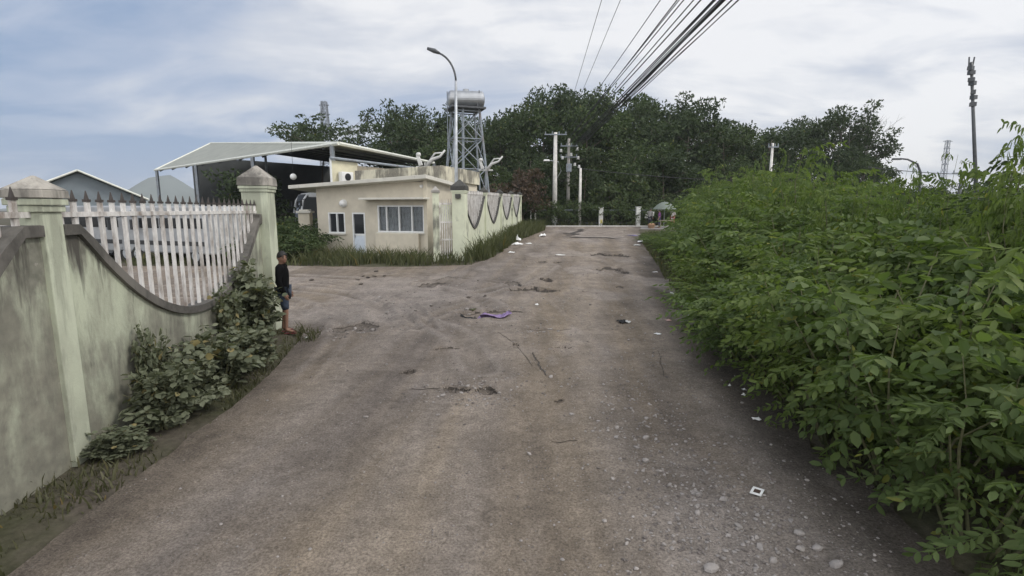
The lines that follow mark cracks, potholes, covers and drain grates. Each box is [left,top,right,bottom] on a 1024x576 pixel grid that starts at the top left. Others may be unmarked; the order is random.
pothole [475,386,497,395]
crack [503,329,568,375]
pothole [332,321,380,333]
